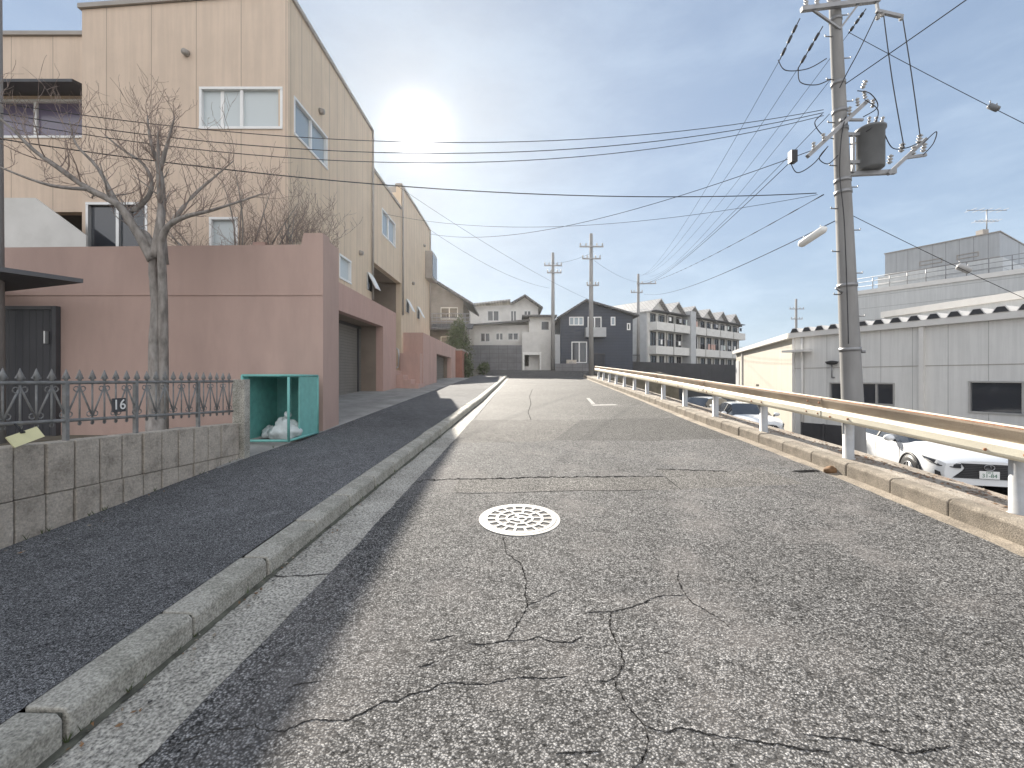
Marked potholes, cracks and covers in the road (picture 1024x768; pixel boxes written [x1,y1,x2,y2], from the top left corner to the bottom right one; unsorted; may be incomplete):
crack [430,538,951,768]
manhole cover [479,504,560,536]
crack [138,660,568,768]
